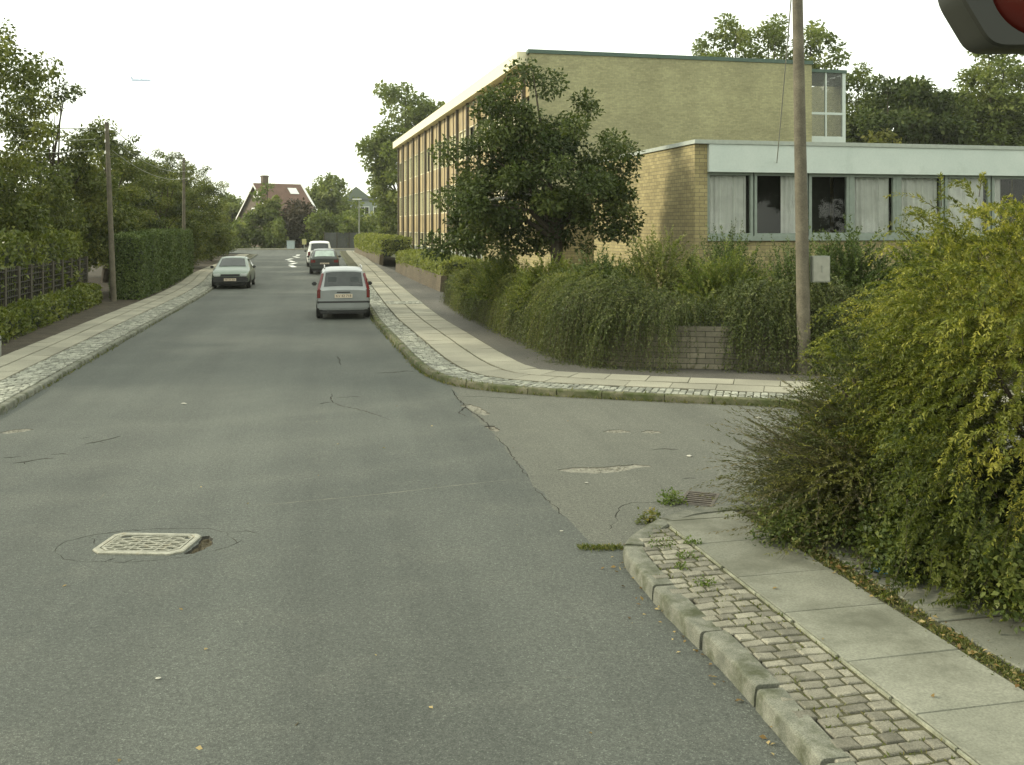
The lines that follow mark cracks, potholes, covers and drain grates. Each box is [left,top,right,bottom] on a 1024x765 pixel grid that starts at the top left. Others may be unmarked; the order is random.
drain grate [679,490,720,507]
pothole [184,536,213,554]
crack [452,390,517,429]
